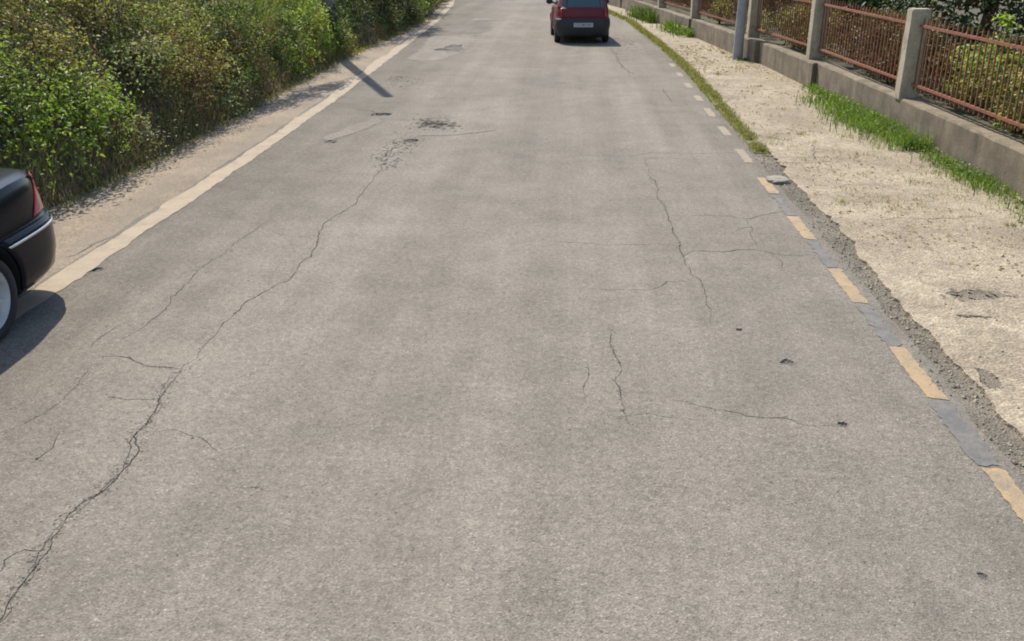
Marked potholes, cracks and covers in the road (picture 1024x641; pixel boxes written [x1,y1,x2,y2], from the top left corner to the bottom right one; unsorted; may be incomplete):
pothole [409,118,457,133]
crack [0,137,411,626]
crack [606,325,847,428]
crack [552,169,817,322]
